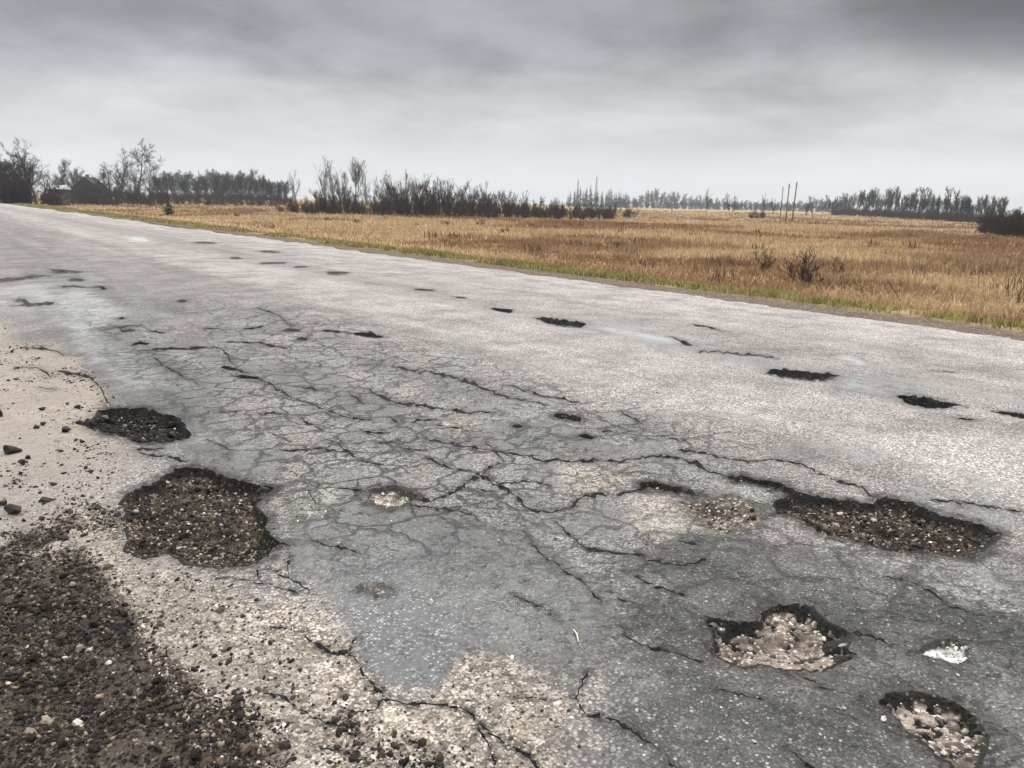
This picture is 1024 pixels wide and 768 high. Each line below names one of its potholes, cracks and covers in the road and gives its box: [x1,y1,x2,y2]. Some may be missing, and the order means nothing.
crack [620,624,712,664]
pothole [727,475,1002,558]
pothole [879,690,990,768]
crack [575,673,677,768]
pothole [766,368,840,382]
crack [14,346,109,403]
crack [98,325,874,603]
pothole [365,485,419,509]
pothole [705,603,857,673]
pothole [118,467,287,569]
pothole [897,395,962,409]
pothole [683,496,760,533]
